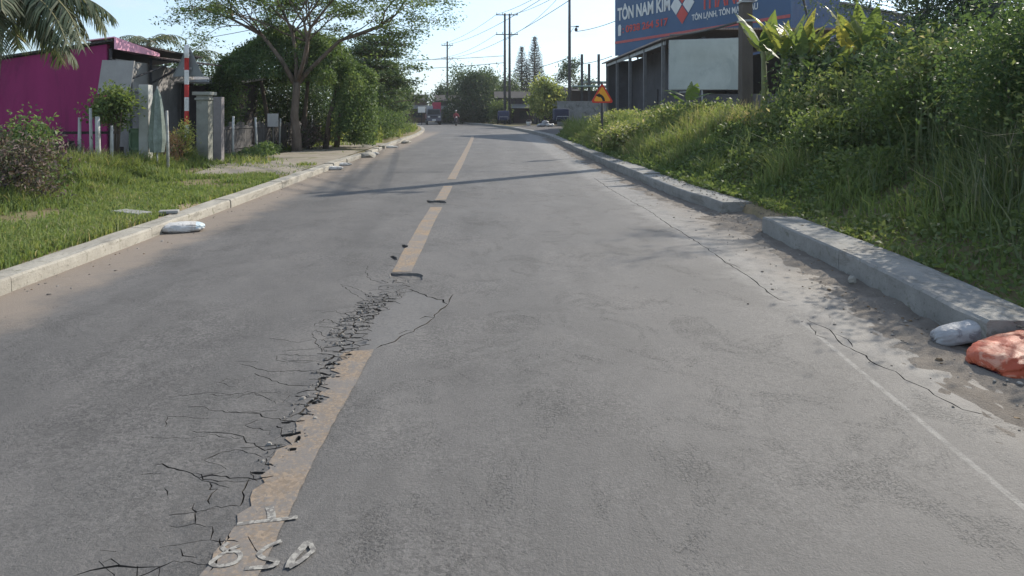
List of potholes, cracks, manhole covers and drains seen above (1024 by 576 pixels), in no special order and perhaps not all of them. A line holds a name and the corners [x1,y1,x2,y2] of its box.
crack [74,214,413,576]
crack [806,320,989,415]
crack [603,184,789,301]
